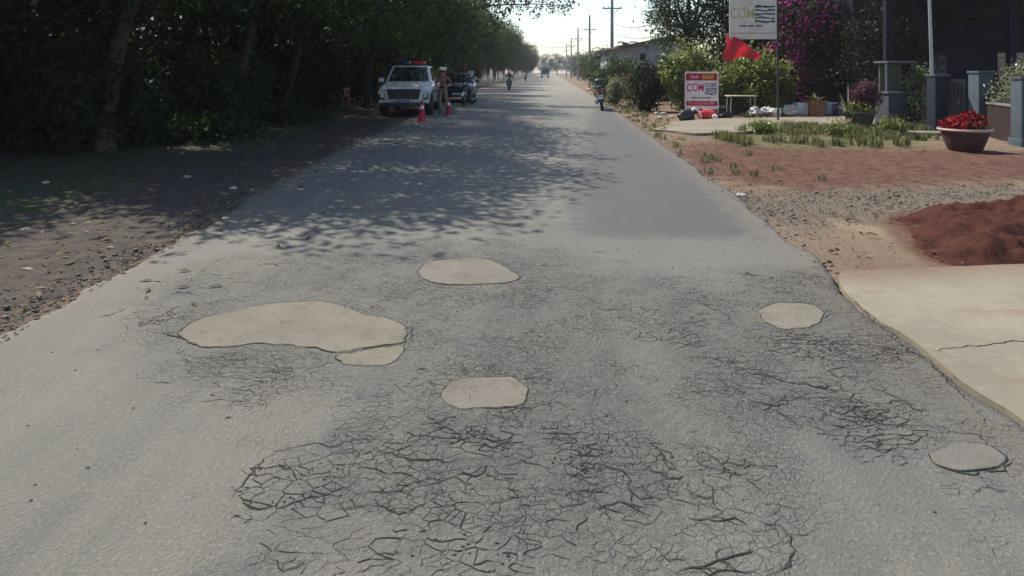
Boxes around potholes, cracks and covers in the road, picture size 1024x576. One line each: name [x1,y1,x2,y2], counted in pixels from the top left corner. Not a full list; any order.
crack [104,270,811,576]
crack [562,268,1024,557]
